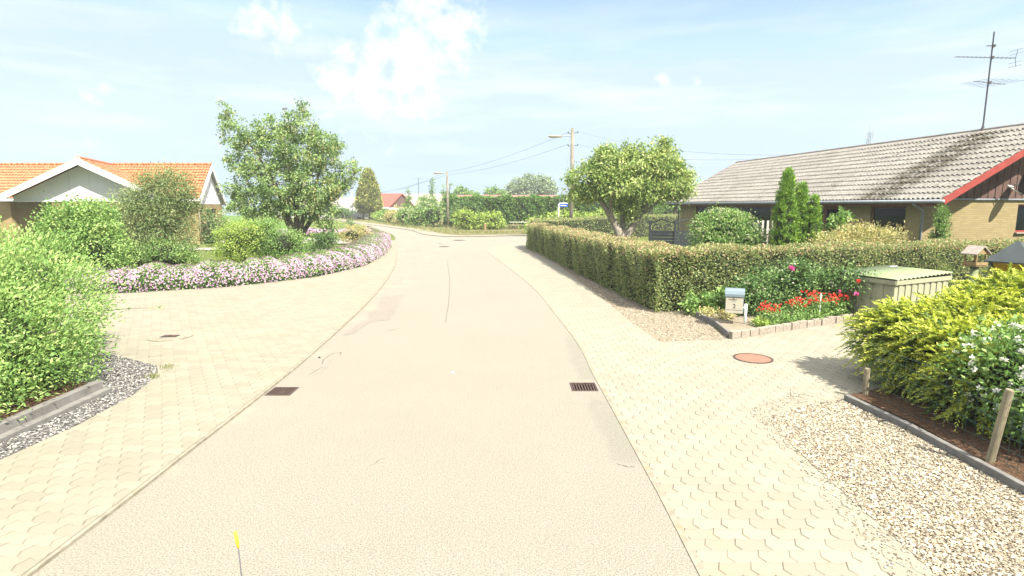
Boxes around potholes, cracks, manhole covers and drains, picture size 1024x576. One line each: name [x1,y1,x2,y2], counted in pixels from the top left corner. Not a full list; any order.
manhole cover [733,353,774,364]
drain grate [264,387,299,396]
manhole cover [147,332,194,342]
drain grate [570,383,598,391]
